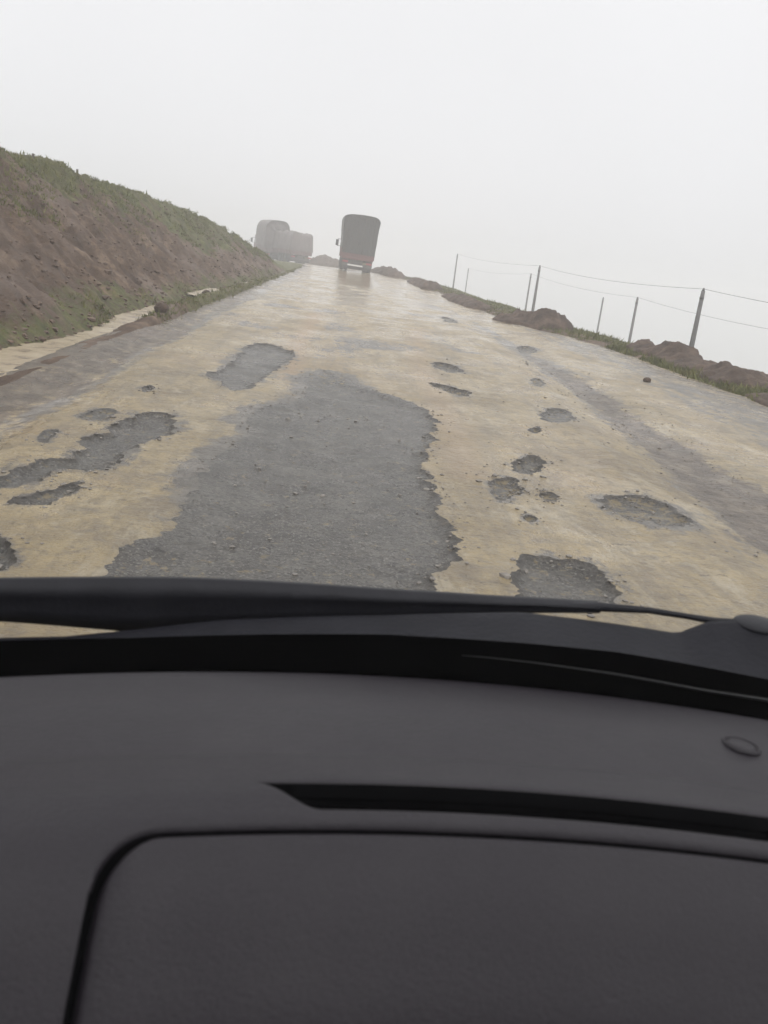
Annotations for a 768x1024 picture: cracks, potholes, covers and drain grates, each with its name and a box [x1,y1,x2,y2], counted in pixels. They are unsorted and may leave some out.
pothole [0,537,17,571]
pothole [509,455,547,474]
pothole [510,554,623,604]
pothole [79,408,118,421]
pothole [596,495,697,527]
pothole [429,383,472,396]
pothole [487,476,525,502]
pothole [430,362,464,373]
pothole [539,408,575,423]
pothole [104,371,464,591]
pothole [7,480,82,505]
pothole [0,412,178,488]
